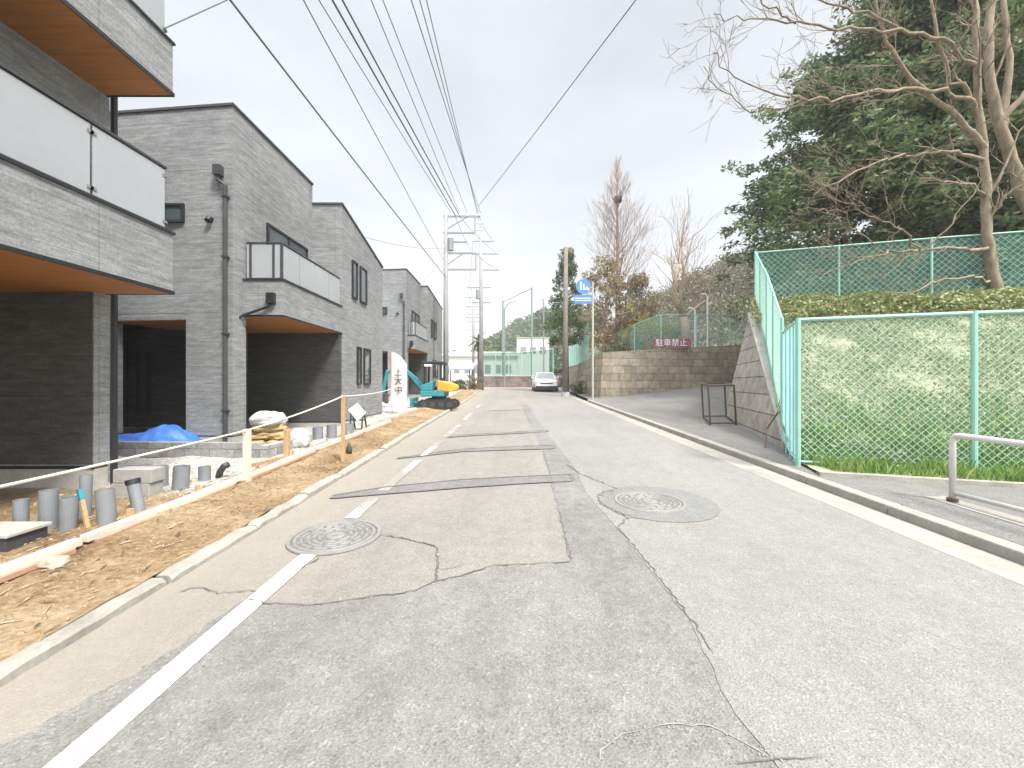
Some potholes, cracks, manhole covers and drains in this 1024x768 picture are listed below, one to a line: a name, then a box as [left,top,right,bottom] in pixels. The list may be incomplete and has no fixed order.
manhole cover [285,519,382,555]
crack [567,464,629,526]
crack [181,534,569,605]
manhole cover [614,491,687,513]
crack [583,719,829,767]
